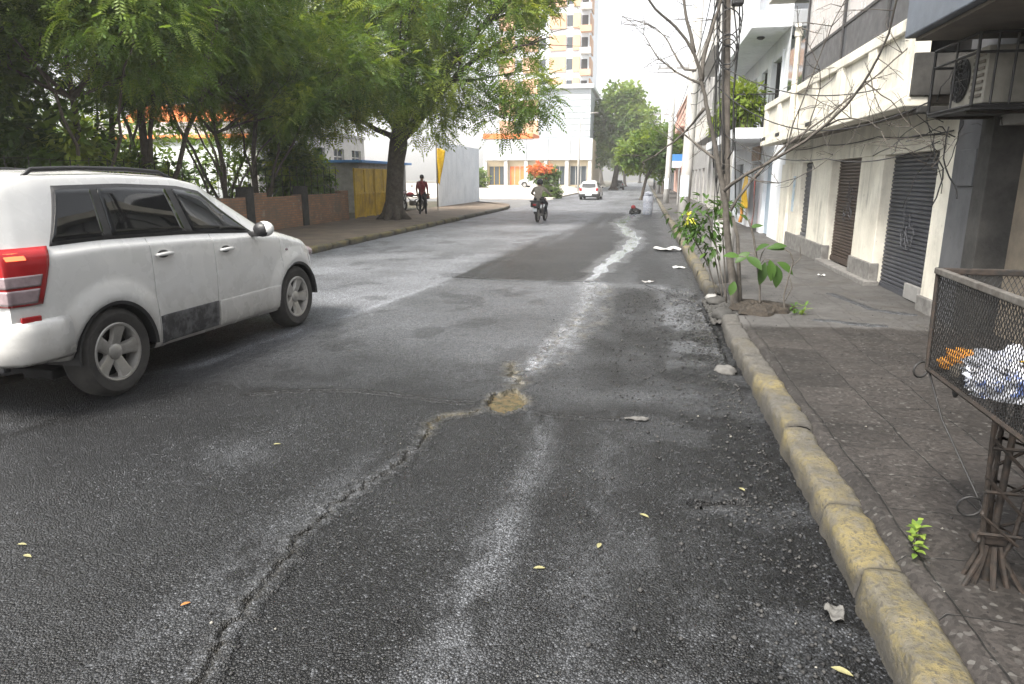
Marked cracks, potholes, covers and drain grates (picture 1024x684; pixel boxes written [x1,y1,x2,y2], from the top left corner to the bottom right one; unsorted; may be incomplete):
crack [169,362,537,684]
crack [529,407,619,422]
pothole [476,385,537,418]
